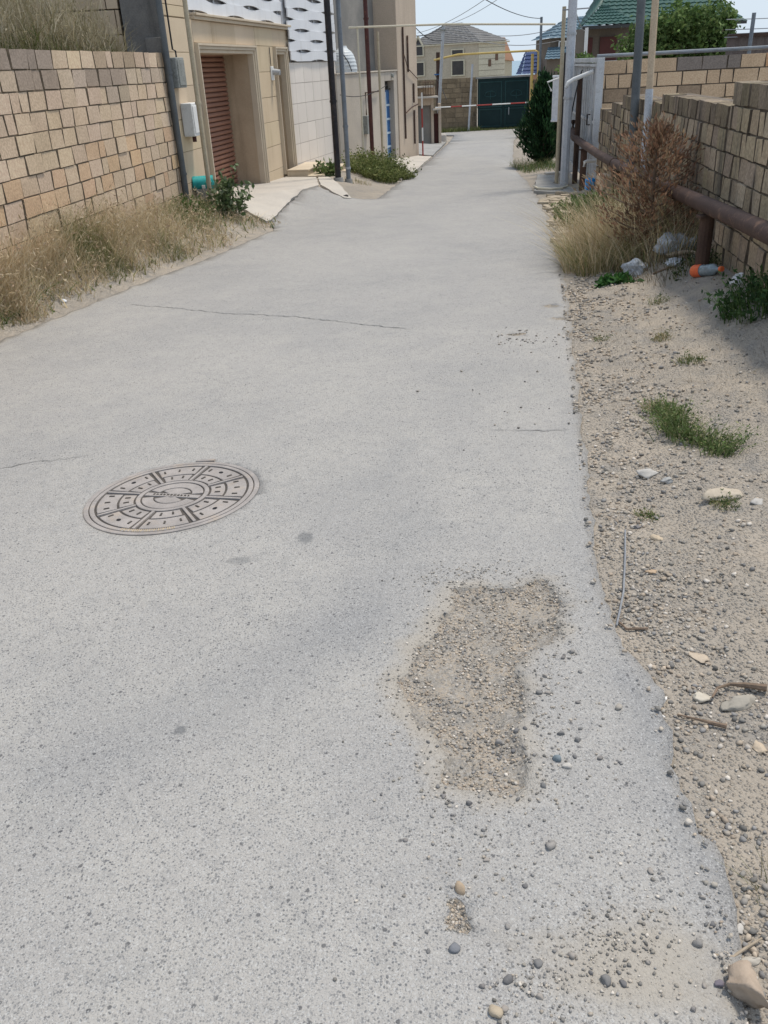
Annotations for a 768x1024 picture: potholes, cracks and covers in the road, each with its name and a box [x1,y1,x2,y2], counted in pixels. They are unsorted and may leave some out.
manhole cover [83,459,260,536]
pothole [397,578,564,798]
pothole [444,897,472,935]
crack [143,305,406,329]
